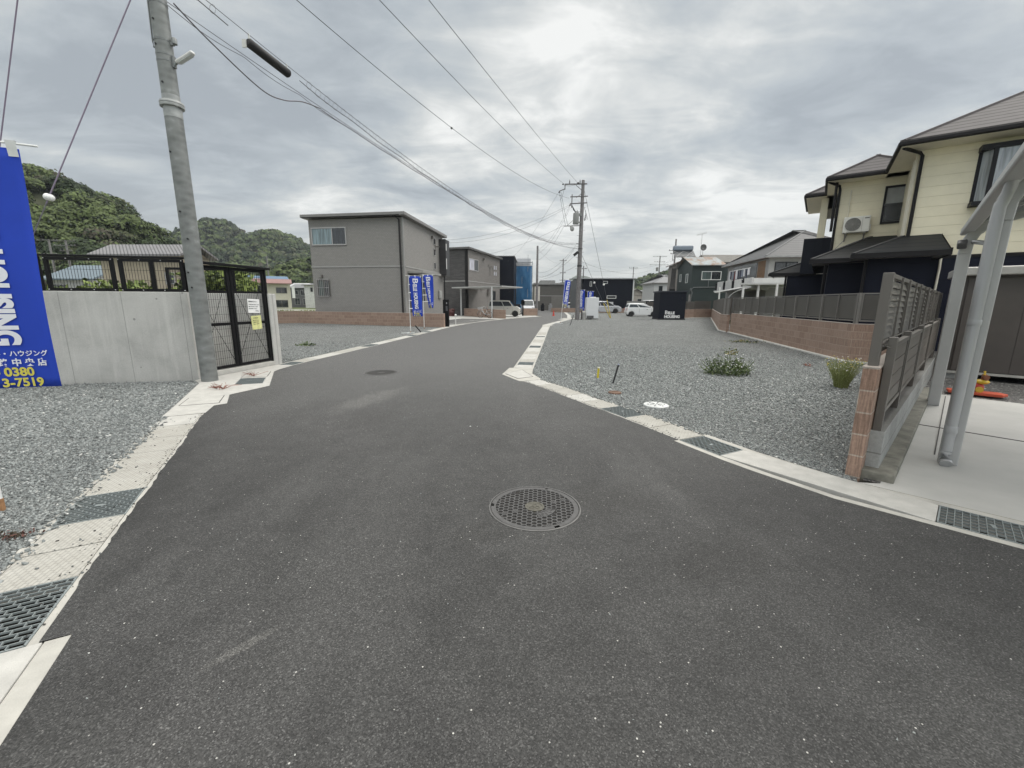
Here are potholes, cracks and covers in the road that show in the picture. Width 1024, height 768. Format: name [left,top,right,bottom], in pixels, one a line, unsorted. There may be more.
drain grate [51,487,145,527]
drain grate [680,436,743,456]
drain grate [601,406,645,418]
manhole cover [489,486,581,532]
drain grate [0,576,78,653]
drain grate [937,505,1024,545]
